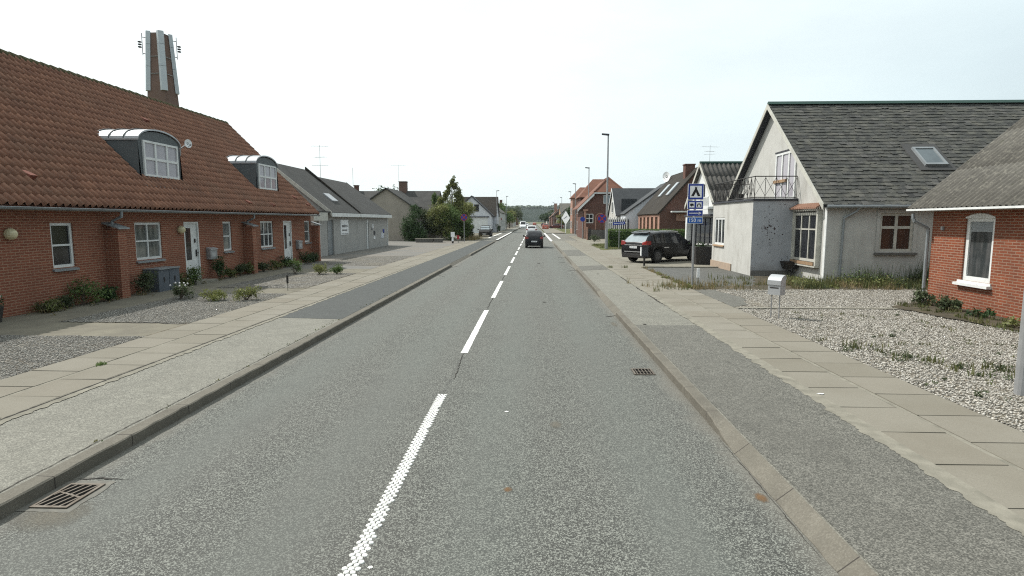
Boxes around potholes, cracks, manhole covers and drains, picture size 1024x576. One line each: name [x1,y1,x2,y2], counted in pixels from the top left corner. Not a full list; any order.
drain grate [17,480,115,513]
